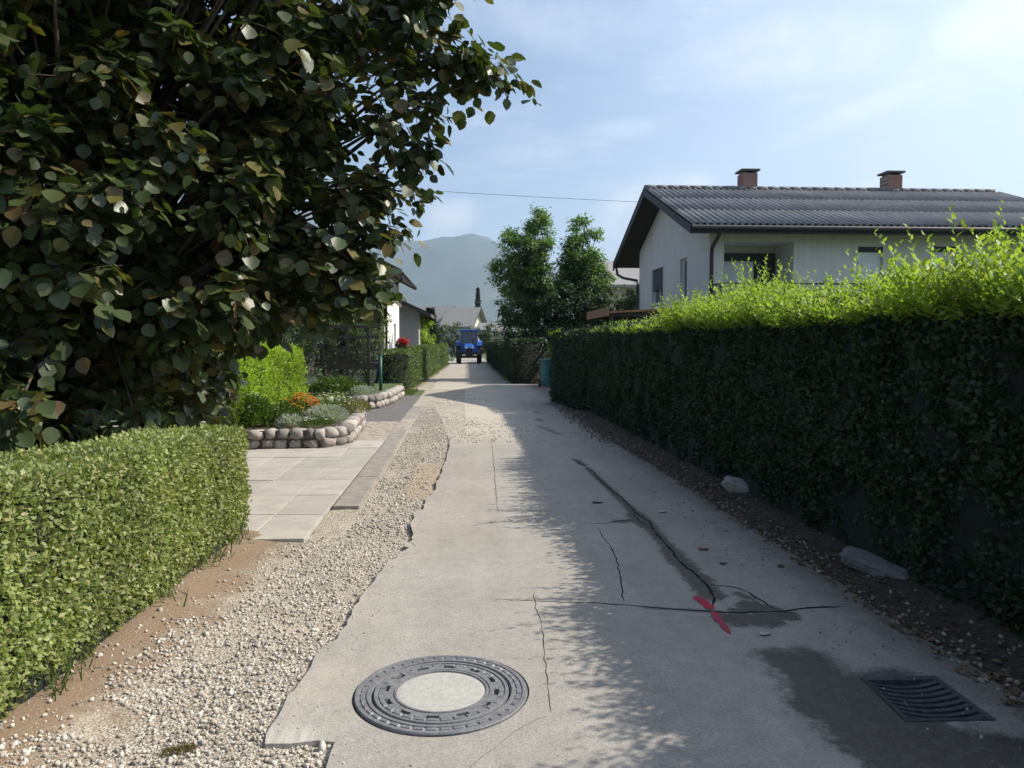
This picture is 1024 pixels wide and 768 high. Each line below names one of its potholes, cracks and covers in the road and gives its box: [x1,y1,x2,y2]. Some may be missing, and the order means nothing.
drain grate [861,676,997,722]
manhole cover [352,655,528,737]
crack [469,459,844,768]
